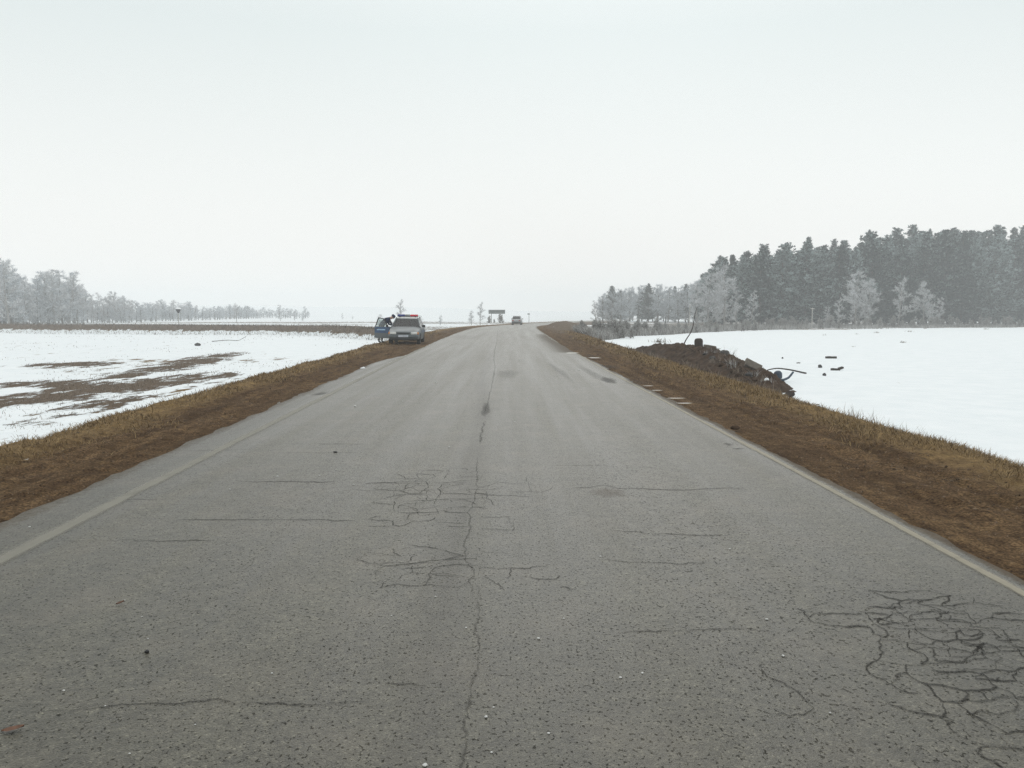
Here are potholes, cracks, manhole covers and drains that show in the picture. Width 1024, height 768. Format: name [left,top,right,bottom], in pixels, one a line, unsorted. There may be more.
crack [30,698,354,713]
crack [185,468,547,530]
